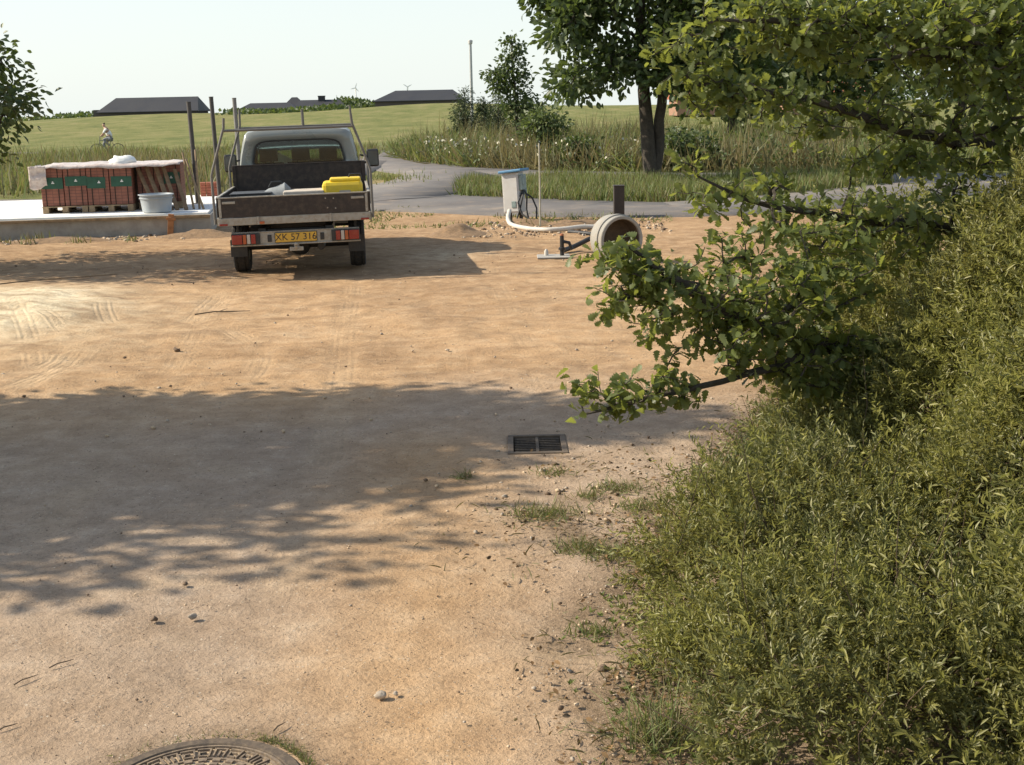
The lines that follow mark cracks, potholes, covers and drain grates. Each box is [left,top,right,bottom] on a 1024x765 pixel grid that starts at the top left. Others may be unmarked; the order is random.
manhole cover [120,738,300,765]
drain grate [508,434,569,455]
